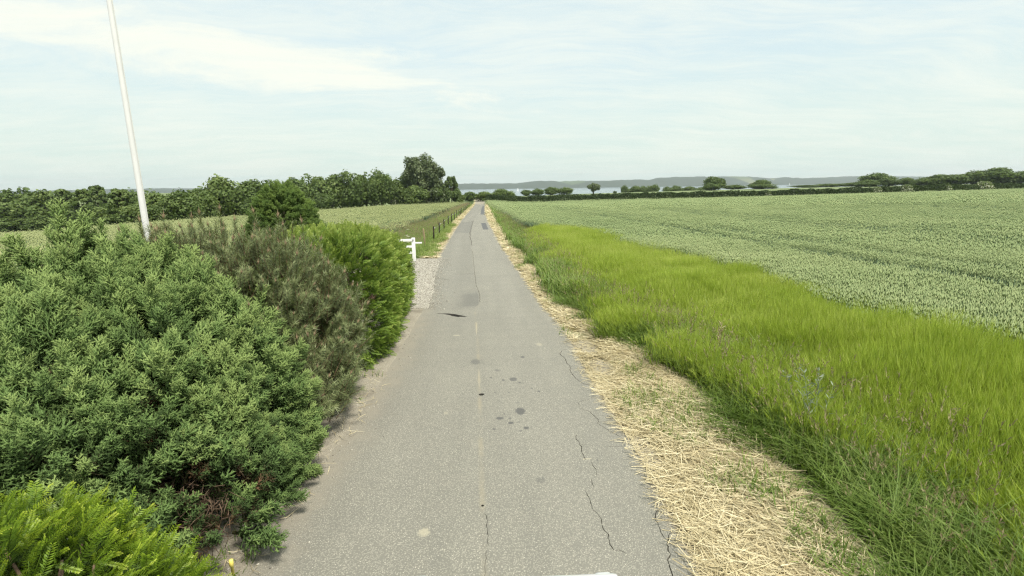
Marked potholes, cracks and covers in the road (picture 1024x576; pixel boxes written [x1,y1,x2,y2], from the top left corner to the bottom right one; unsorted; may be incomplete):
crack [655,509,677,576]
crack [560,349,625,553]
